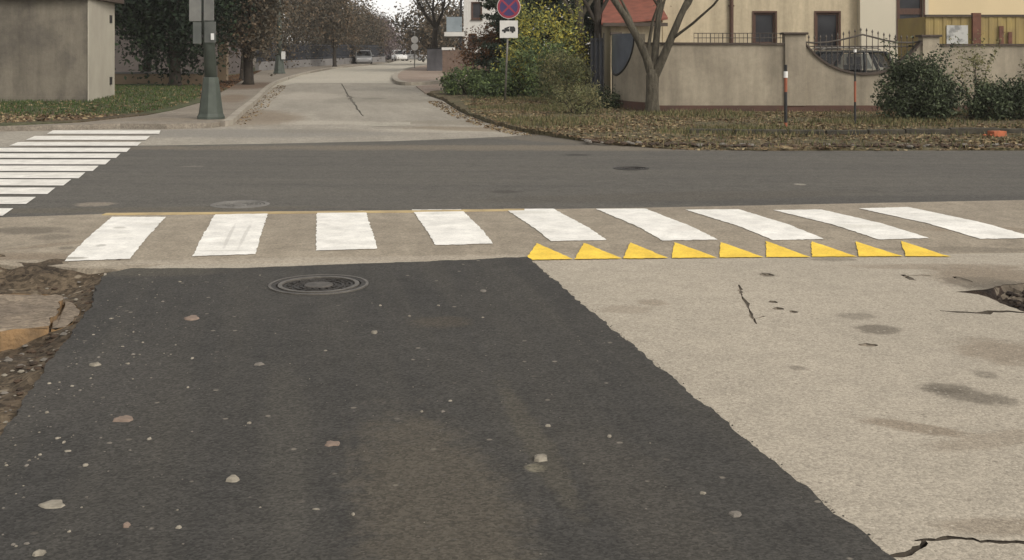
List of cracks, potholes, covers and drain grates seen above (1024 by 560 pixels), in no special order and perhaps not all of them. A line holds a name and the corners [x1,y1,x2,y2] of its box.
crack [890,536,1024,557]
crack [341,84,364,116]
crack [737,285,763,324]
pothole [963,284,1024,312]
manhole cover [268,274,369,295]
manhole cover [210,200,270,209]
